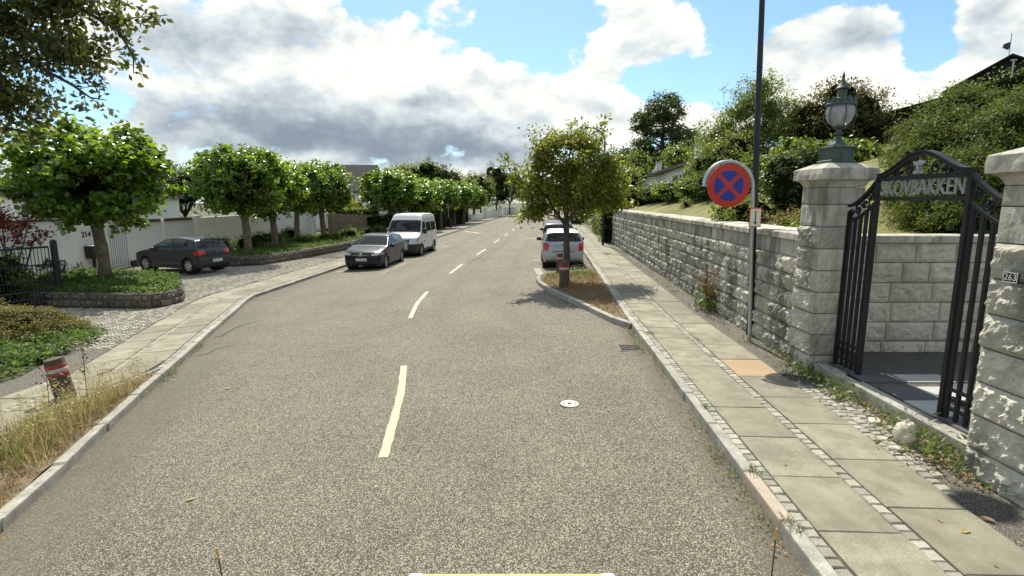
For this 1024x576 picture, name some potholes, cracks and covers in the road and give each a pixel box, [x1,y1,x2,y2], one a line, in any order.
manhole cover [560,400,579,408]
